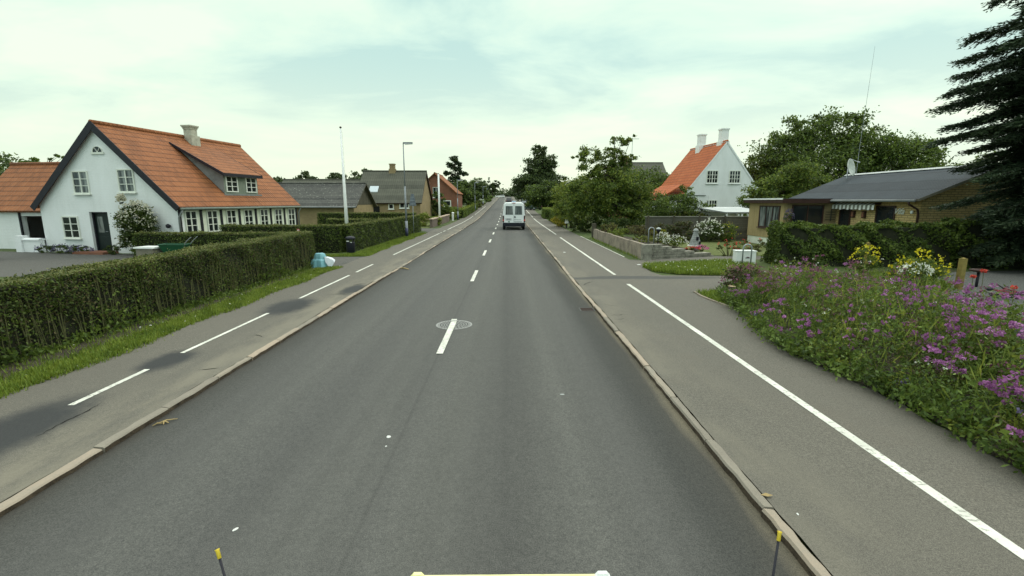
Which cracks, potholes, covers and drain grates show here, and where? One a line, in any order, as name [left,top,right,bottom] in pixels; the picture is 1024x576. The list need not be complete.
manhole cover [436,320,472,329]
